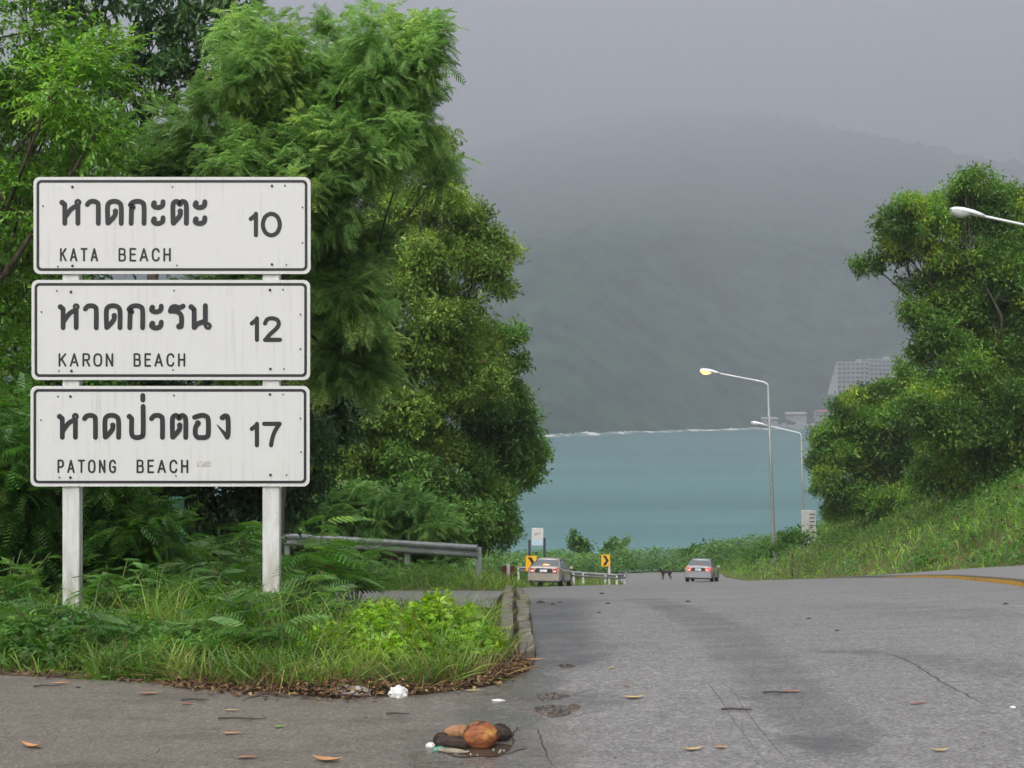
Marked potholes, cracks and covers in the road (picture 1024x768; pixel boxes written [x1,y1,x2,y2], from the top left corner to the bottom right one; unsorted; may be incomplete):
crack [868,652,989,707]
pothole [534,704,582,718]
pothole [536,692,570,702]
crack [537,728,553,766]
